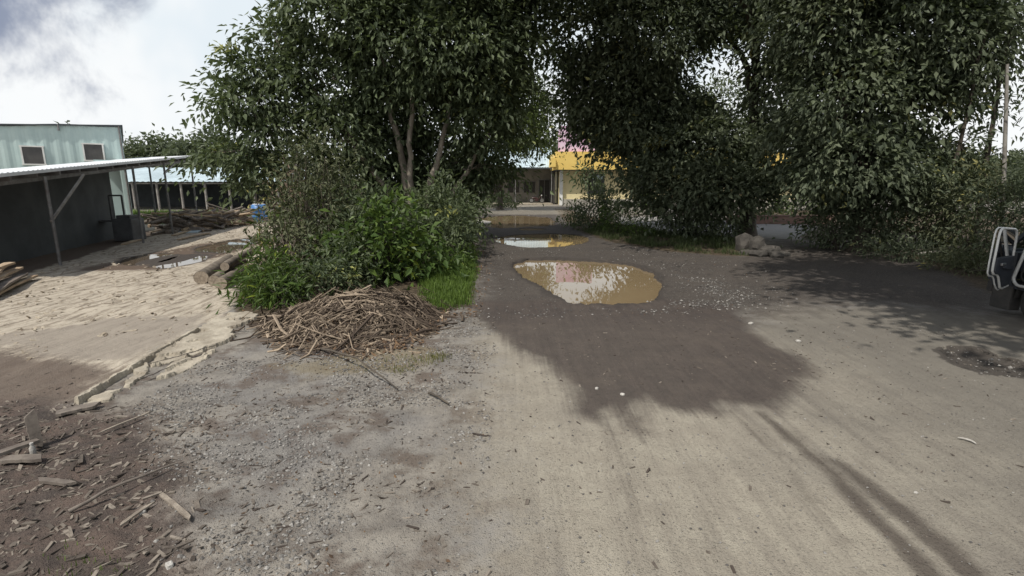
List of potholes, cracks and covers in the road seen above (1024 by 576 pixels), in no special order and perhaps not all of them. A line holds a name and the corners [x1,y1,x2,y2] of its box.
pothole [482,232,601,249]
pothole [499,256,686,312]
pothole [898,336,1024,391]
